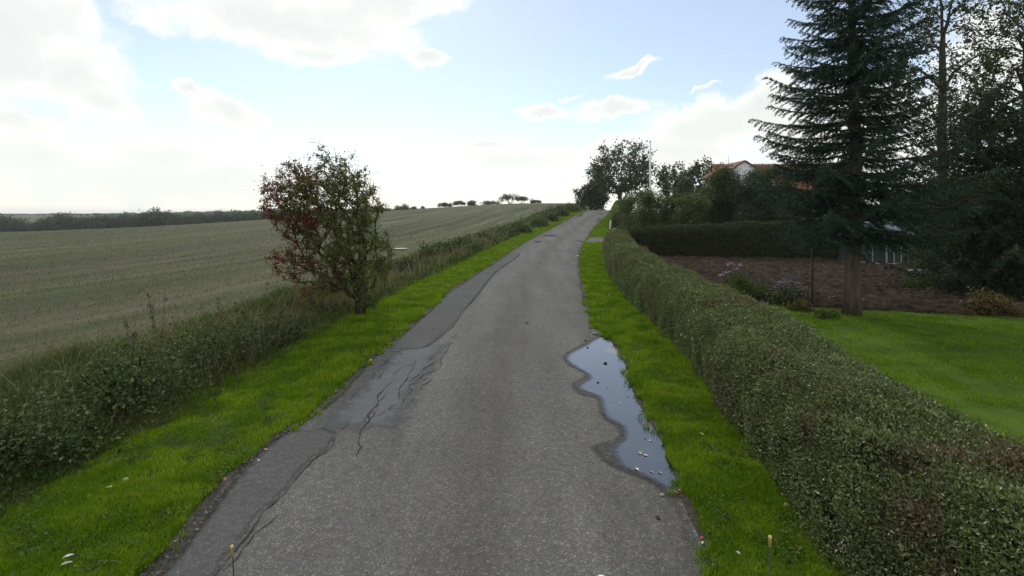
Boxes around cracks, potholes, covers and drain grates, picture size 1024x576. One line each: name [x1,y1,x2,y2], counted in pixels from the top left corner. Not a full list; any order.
crack [221,517,276,573]
crack [346,346,449,456]
